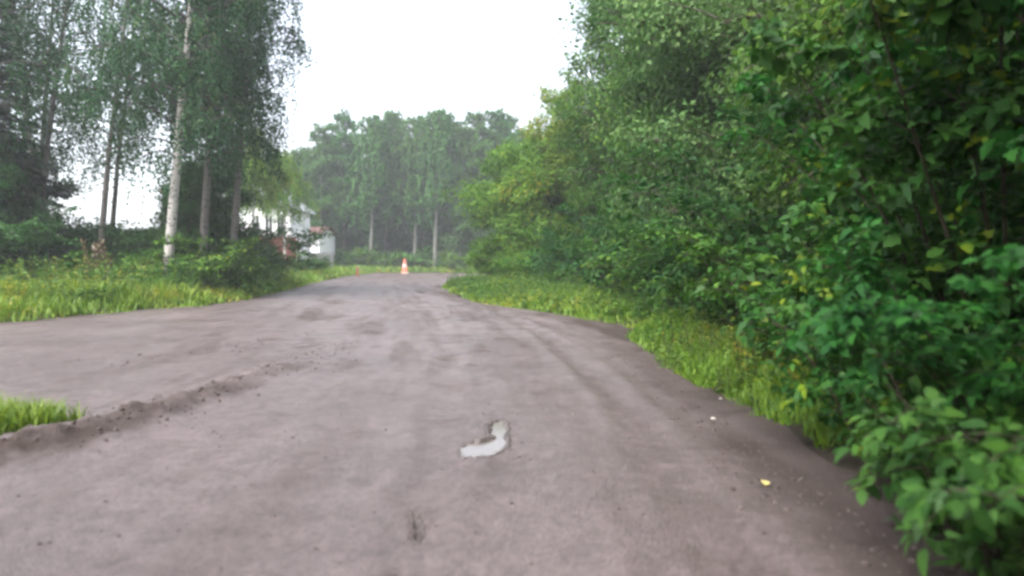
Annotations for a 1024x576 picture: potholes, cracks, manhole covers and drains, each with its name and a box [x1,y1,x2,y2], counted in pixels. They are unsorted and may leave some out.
pothole [456,418,512,460]
pothole [410,510,425,546]
